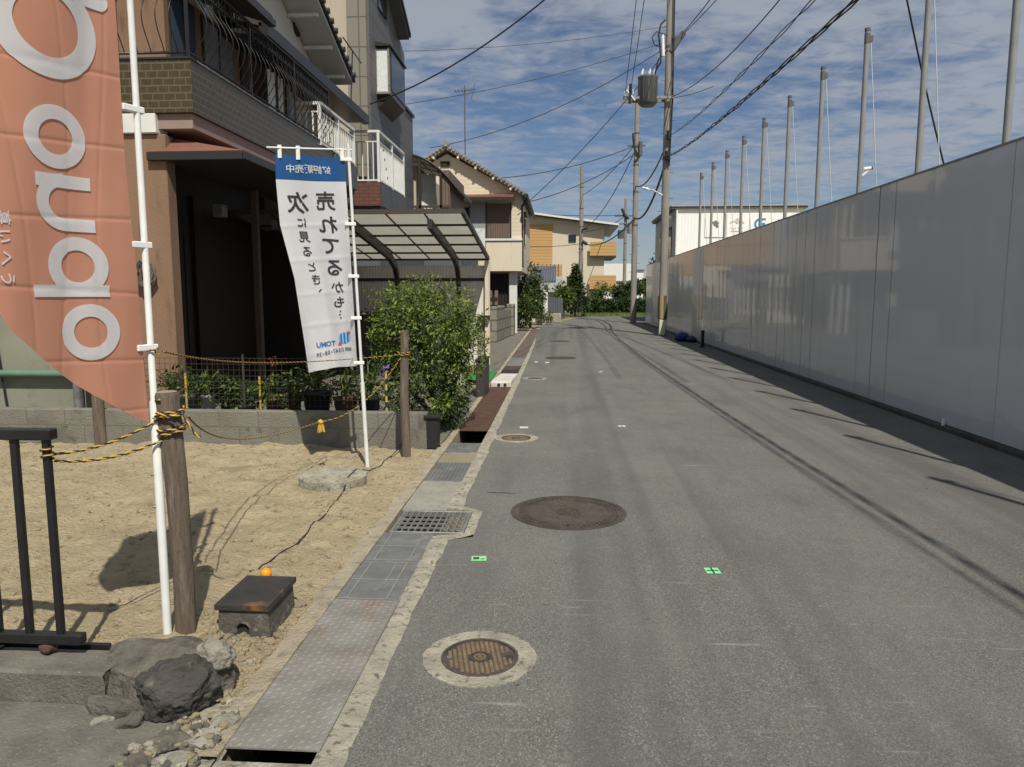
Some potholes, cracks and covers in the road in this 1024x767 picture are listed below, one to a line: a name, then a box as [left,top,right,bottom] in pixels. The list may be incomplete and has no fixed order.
manhole cover [494,434,538,443]
manhole cover [511,496,627,530]
manhole cover [422,631,537,688]
drain grate [389,510,472,538]
